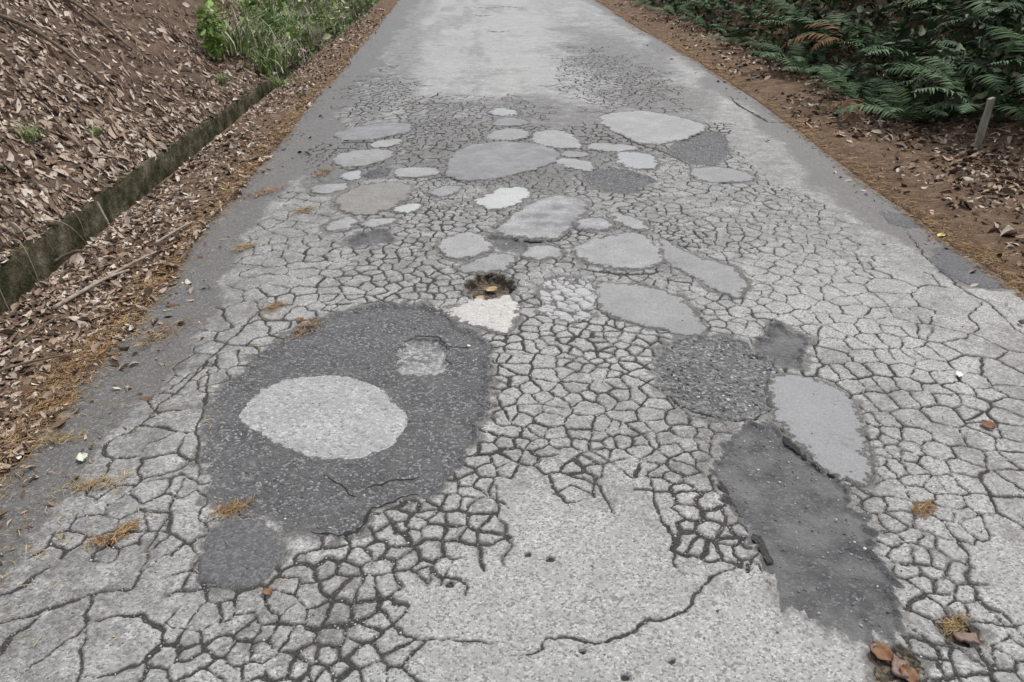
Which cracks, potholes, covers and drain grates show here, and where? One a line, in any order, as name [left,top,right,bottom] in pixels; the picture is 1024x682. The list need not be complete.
crack [29,555,172,668]
crack [144,516,205,547]
crack [493,435,531,451]
crack [194,363,210,478]
pothole [464,273,517,300]
crack [337,633,347,656]
crack [887,543,922,591]
crack [943,641,989,671]
crack [931,493,991,503]
crack [605,447,641,479]
crack [119,509,175,520]
crack [496,452,581,475]
